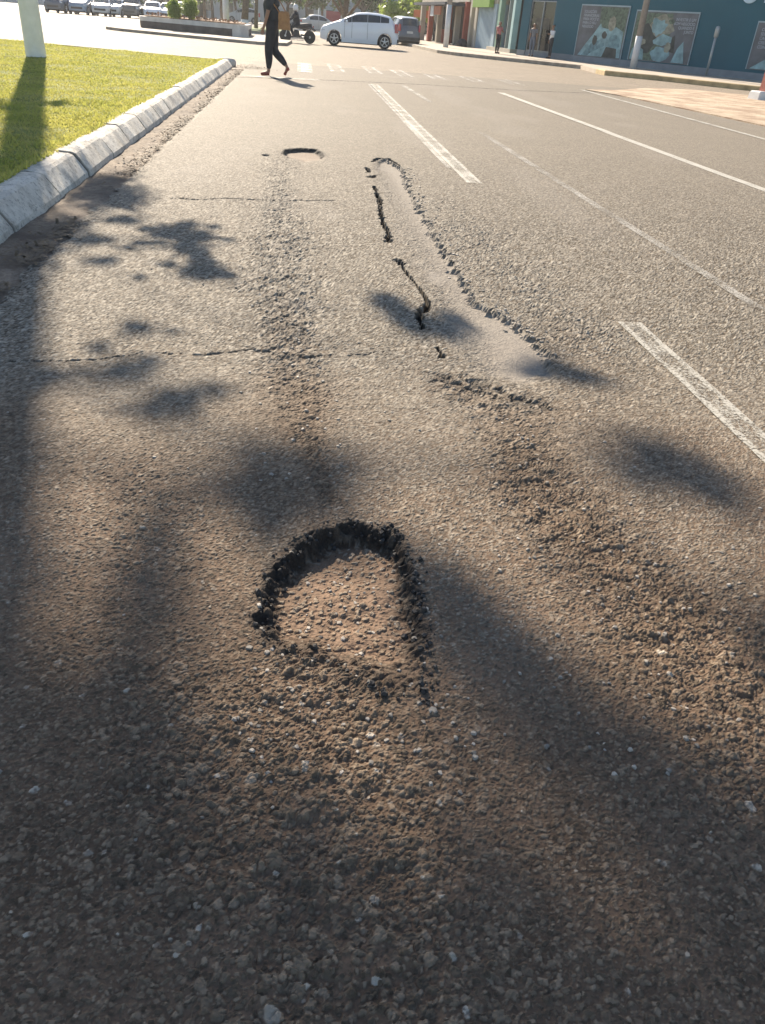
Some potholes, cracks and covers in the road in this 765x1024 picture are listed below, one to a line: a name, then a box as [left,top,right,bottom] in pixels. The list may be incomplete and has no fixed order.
pothole [229,515,452,719]
crack [0,348,400,363]
pothole [277,147,332,166]
